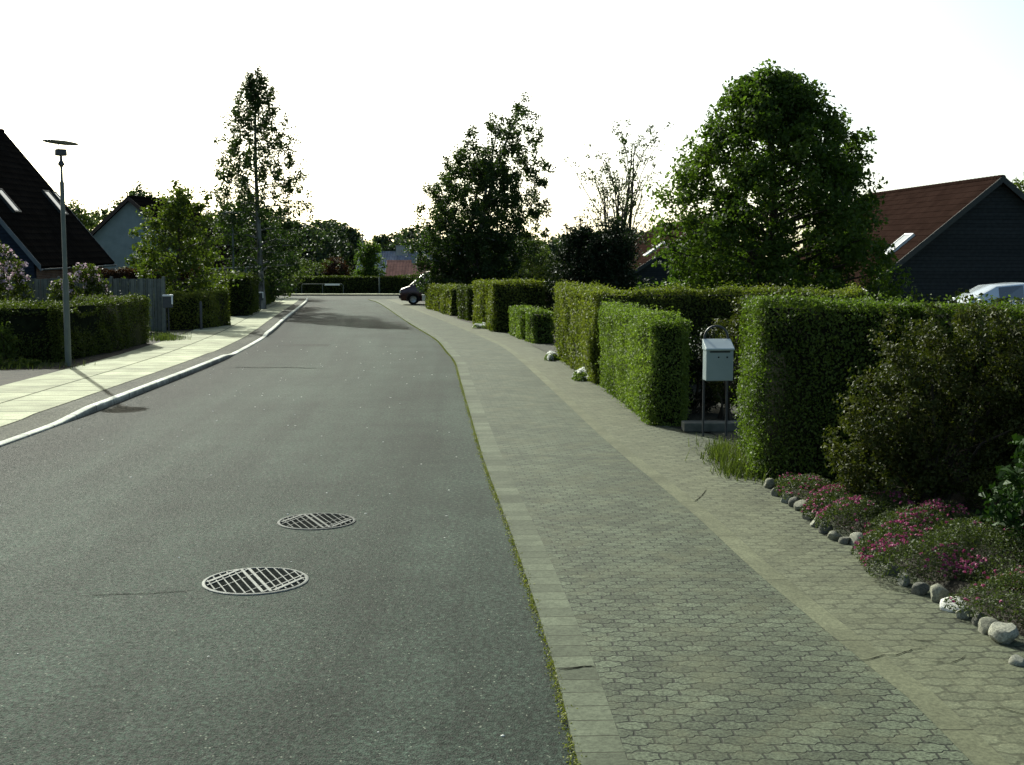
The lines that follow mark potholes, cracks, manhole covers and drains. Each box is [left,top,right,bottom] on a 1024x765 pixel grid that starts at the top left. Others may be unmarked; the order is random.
crack [865,639,963,662]
